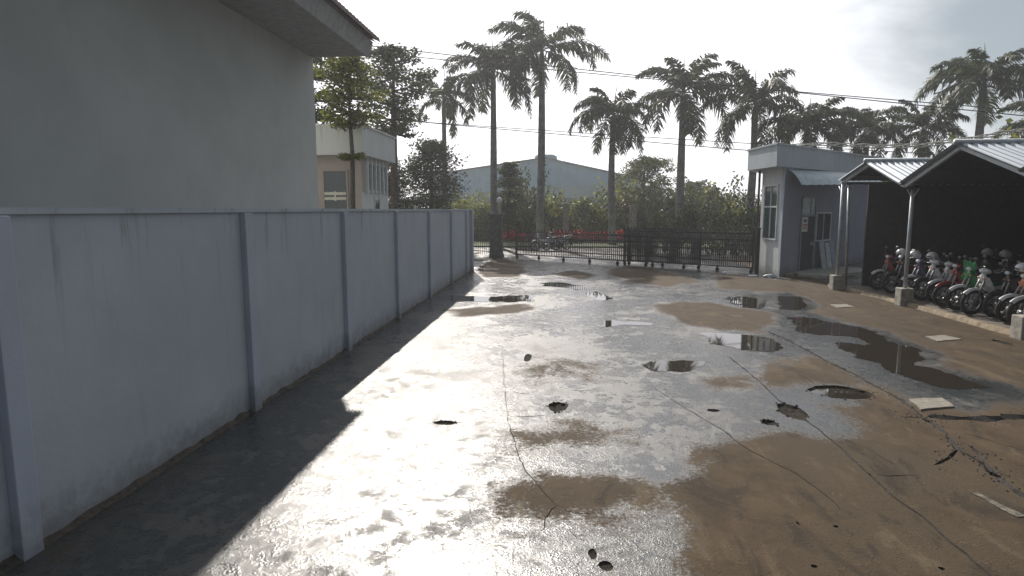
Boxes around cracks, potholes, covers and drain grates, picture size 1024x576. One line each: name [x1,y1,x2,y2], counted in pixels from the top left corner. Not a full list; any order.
crack [652,356,1024,576]
pothole [776,402,809,420]
pothole [546,401,568,413]
pothole [806,384,875,401]
pothole [598,561,613,571]
